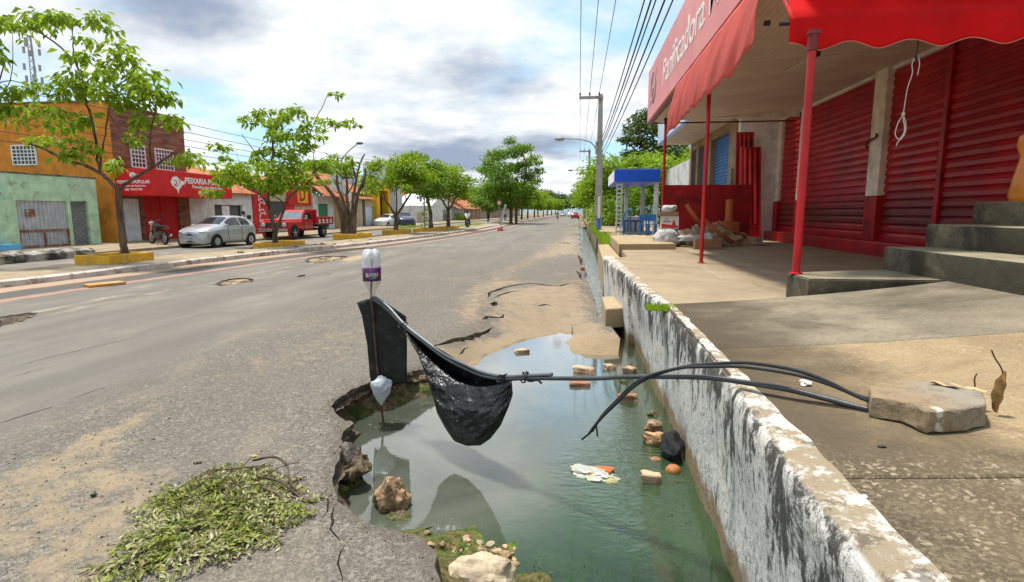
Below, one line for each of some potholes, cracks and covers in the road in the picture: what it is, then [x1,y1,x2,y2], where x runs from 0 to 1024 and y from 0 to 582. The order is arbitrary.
crack [434,226,583,355]
pothole [331,330,704,582]
pothole [0,312,36,327]
pothole [214,278,253,286]
crack [321,493,345,581]
